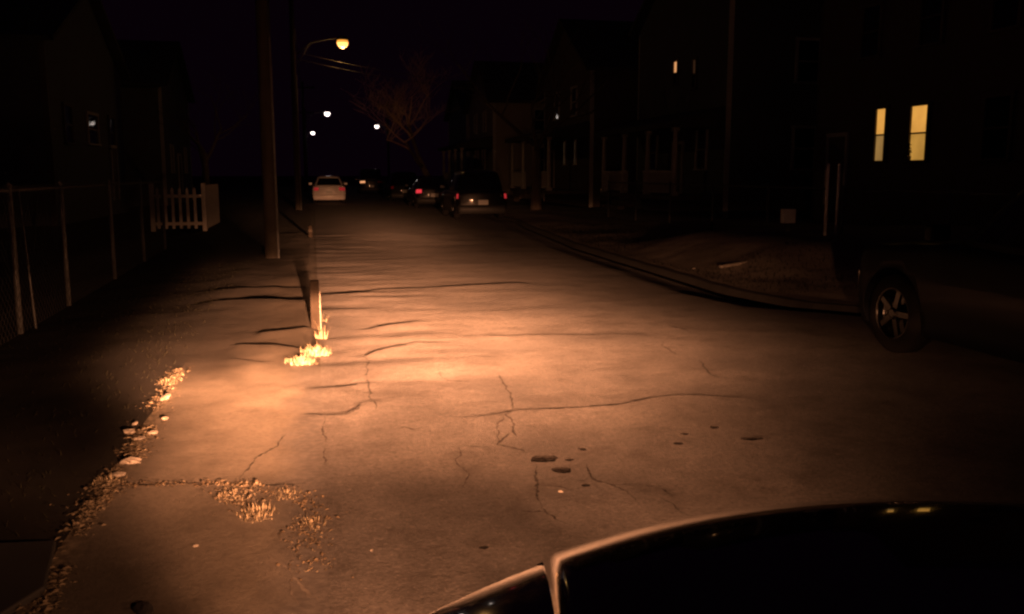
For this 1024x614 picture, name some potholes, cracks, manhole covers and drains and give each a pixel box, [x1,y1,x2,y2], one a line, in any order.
crack [239,435,285,480]
pothole [545,465,580,476]
pothole [523,453,563,465]
crack [311,342,439,416]
crack [455,373,732,524]
